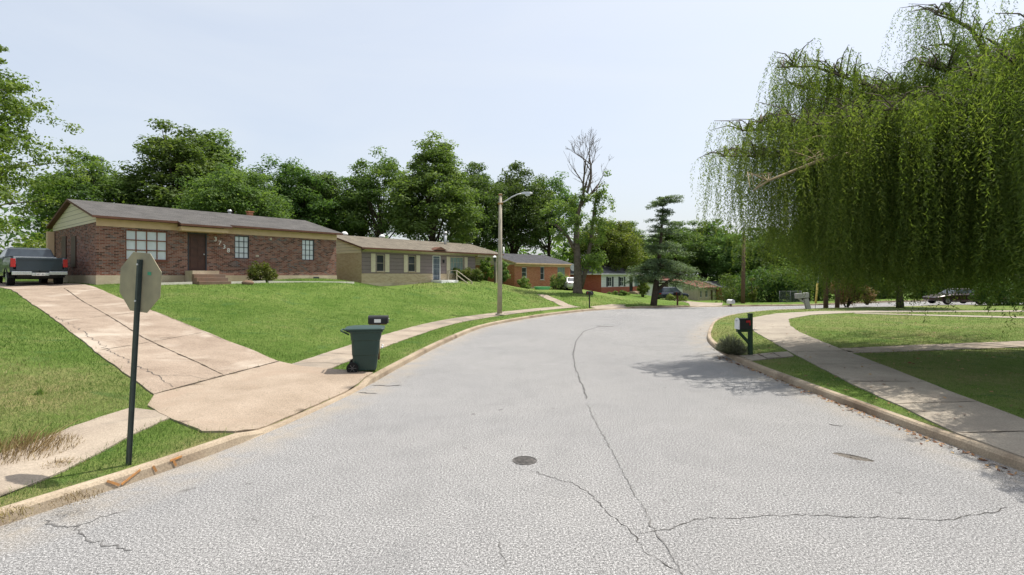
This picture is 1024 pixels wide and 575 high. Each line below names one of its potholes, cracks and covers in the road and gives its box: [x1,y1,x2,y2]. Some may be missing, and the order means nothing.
crack [46,511,133,551]
crack [532,408,1006,575]
manhole cover [512,456,537,465]
